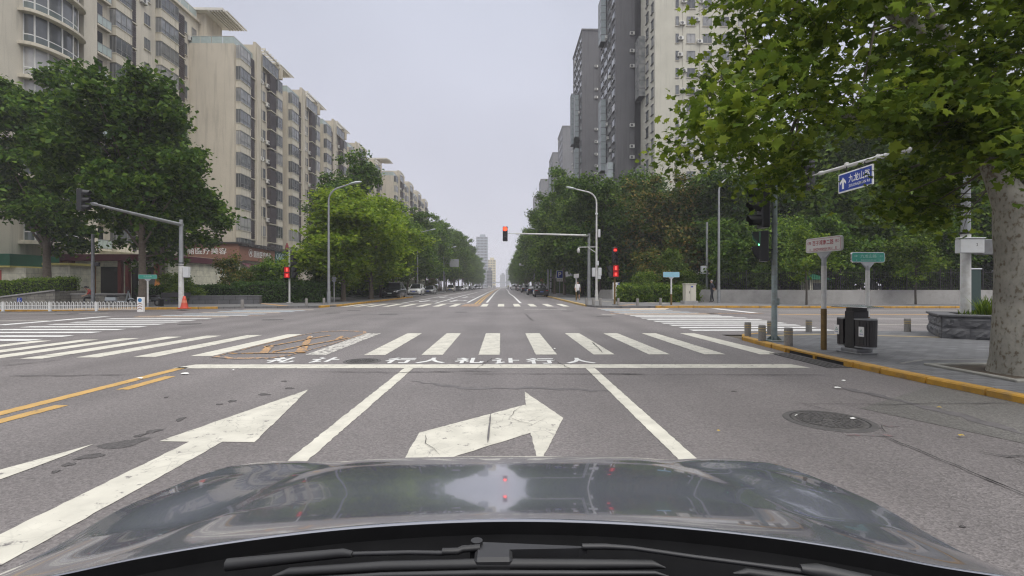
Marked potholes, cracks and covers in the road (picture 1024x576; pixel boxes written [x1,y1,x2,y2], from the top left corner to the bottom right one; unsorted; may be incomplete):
drain grate [770,348,854,368]
manhole cover [782,410,880,433]
